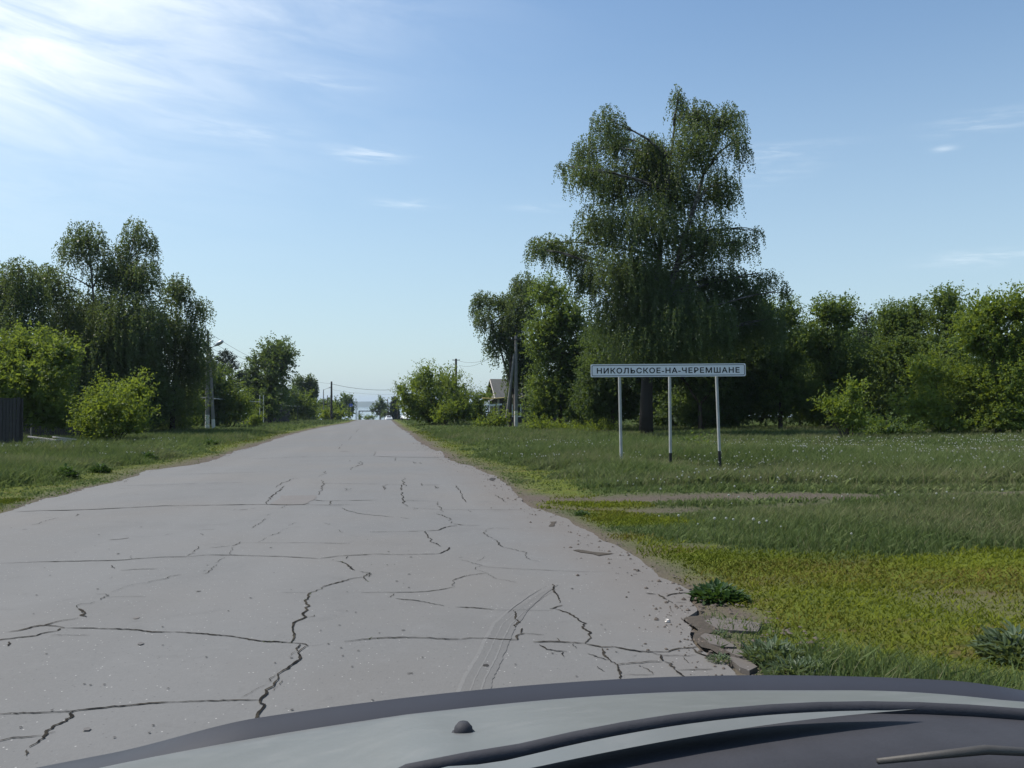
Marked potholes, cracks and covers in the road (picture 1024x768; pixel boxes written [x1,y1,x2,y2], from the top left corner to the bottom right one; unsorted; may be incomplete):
crack [0,451,731,756]
